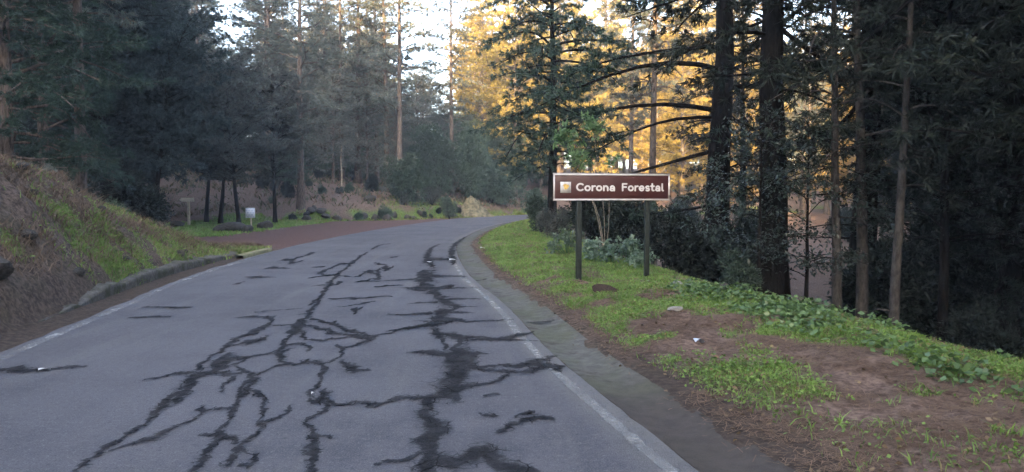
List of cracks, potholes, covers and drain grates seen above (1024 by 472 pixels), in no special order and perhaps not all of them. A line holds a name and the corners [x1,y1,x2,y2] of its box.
crack [0,237,564,472]
